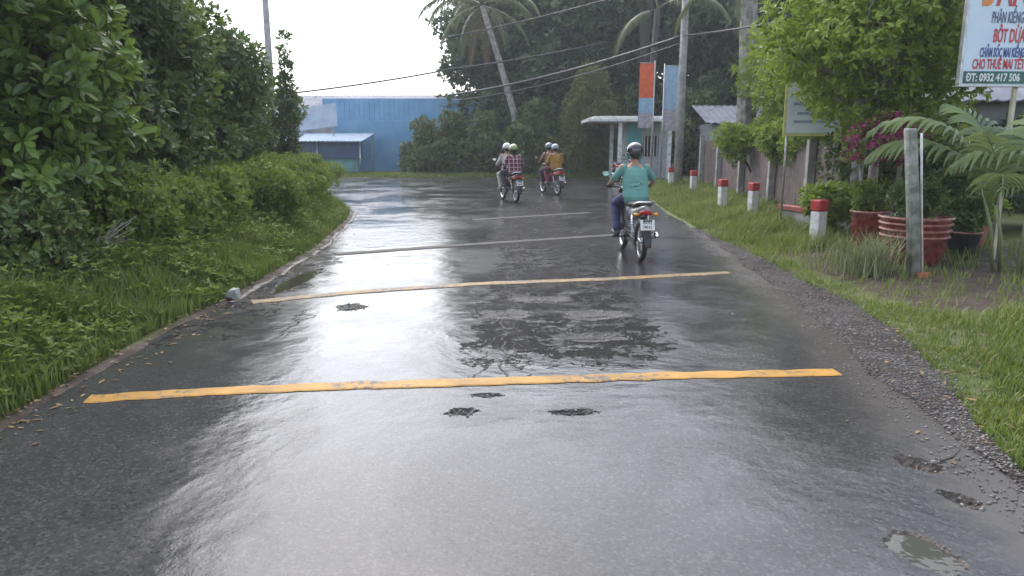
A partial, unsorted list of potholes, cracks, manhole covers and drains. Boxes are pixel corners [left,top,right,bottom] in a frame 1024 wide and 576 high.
pothole [335,303,369,312]
pothole [932,489,986,511]
crack [473,240,534,385]
pothole [882,530,971,576]
pothole [547,408,601,416]
pothole [443,407,482,417]
pothole [891,453,949,476]
